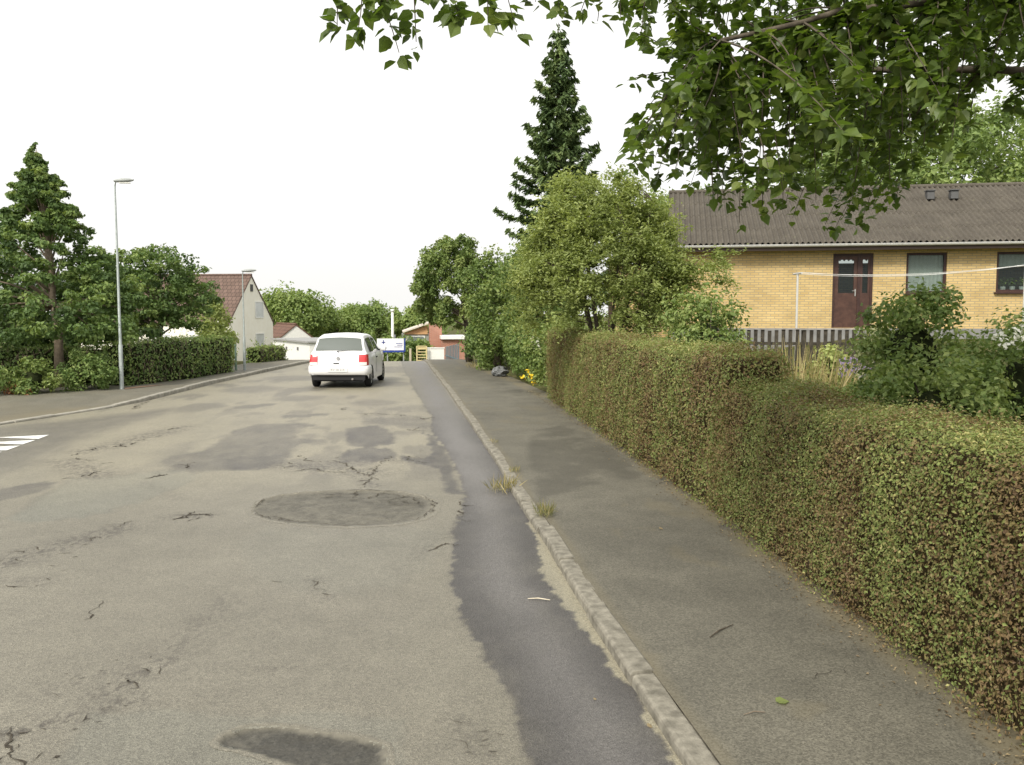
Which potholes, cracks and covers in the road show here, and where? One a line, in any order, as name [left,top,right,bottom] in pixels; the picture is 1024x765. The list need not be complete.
crack [289,408,435,487]
crack [0,650,161,765]
